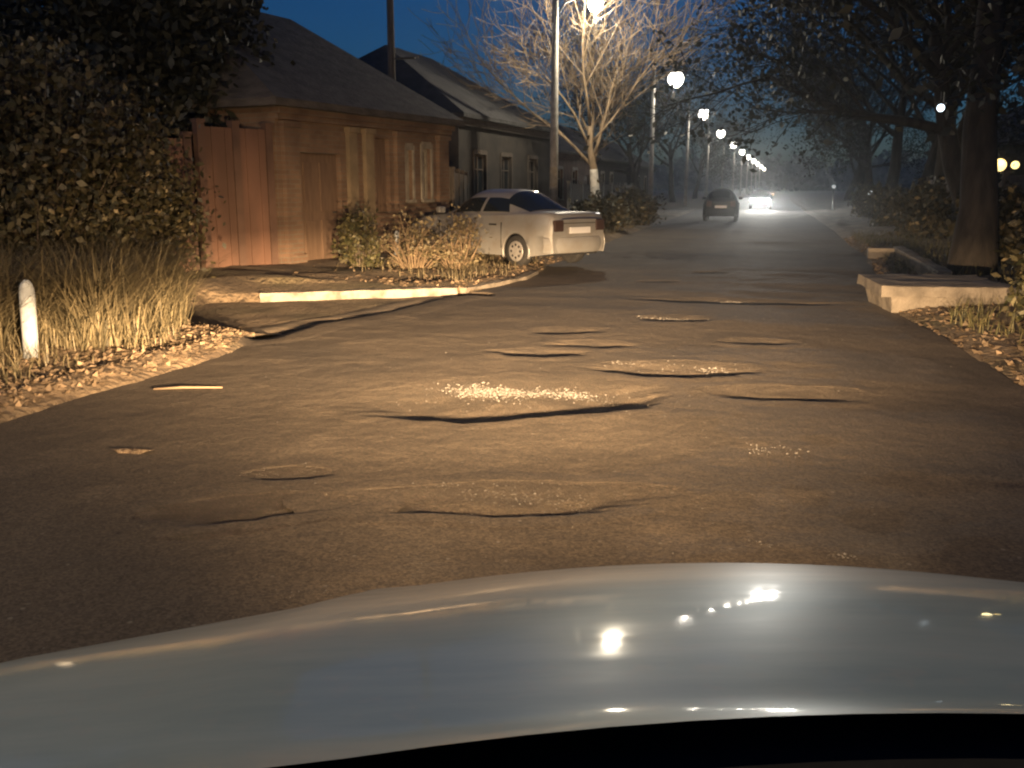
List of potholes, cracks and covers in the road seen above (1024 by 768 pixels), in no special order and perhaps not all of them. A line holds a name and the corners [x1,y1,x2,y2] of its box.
pothole [209,458,363,488]
pothole [282,472,714,531]
pothole [94,483,405,541]
pothole [617,312,734,325]
pothole [468,345,608,361]
pothole [611,295,866,308]
pothole [564,357,785,382]
pothole [682,381,886,407]
pothole [304,370,696,430]
pothole [695,335,823,349]
pothole [527,337,654,353]
pothole [509,324,627,338]
